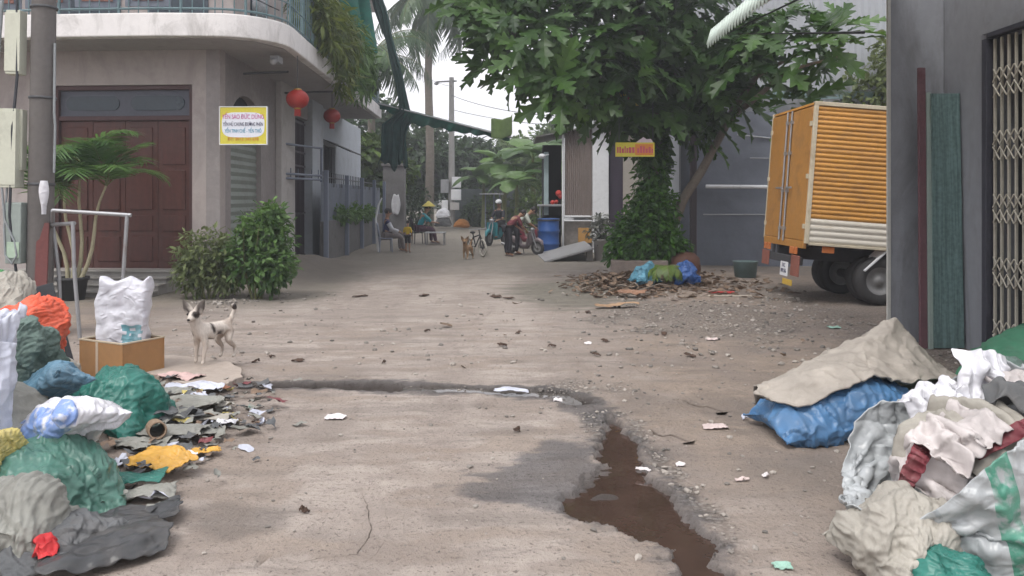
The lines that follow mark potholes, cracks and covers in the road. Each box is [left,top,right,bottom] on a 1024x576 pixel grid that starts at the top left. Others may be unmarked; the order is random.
pothole [545,413,744,576]
crack [257,490,390,574]
crack [230,359,607,407]
crack [638,400,732,444]
